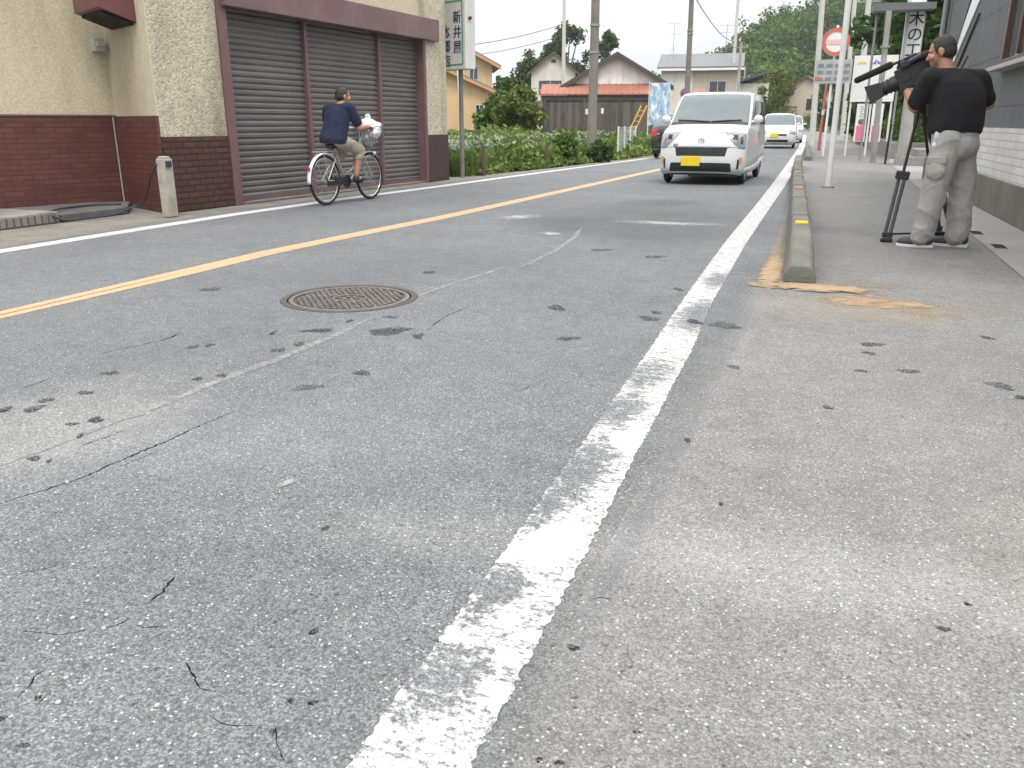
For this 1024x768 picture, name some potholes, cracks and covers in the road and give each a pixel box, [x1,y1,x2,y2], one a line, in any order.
crack [17,671,48,706]
crack [186,662,214,692]
crack [417,228,582,333]
crack [0,314,385,503]
manhole cover [280,285,418,313]
crack [15,575,176,635]
